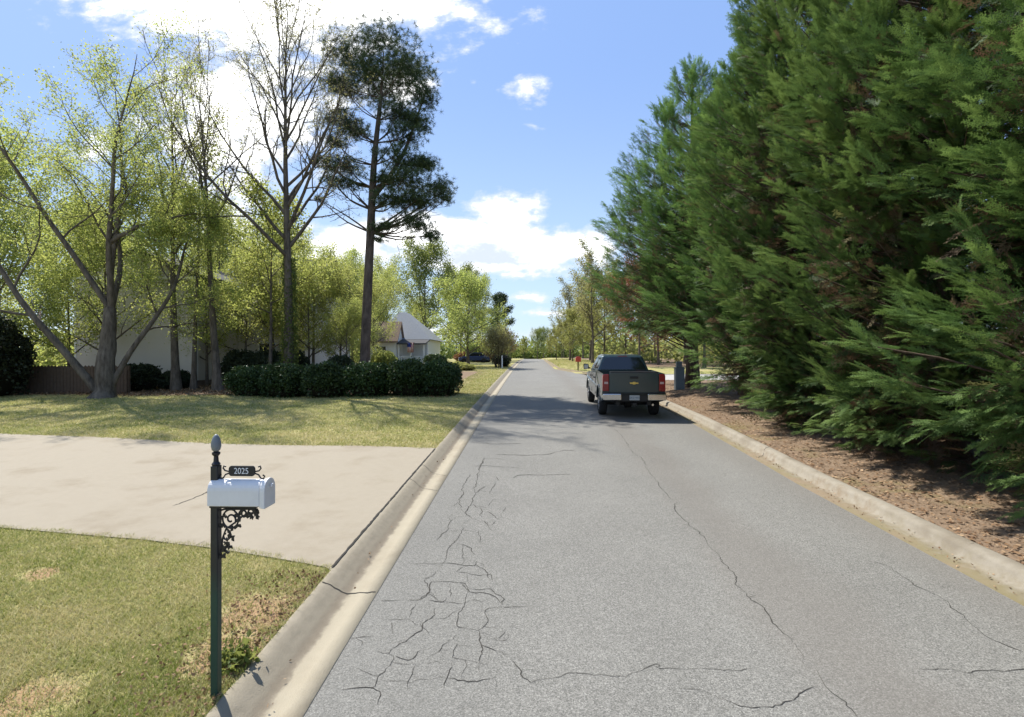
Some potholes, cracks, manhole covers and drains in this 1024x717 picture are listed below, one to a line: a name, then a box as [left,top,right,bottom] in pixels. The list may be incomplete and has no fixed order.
crack [875,562,1023,652]
crack [513,661,750,681]
crack [341,443,575,704]
crack [602,418,857,716]
